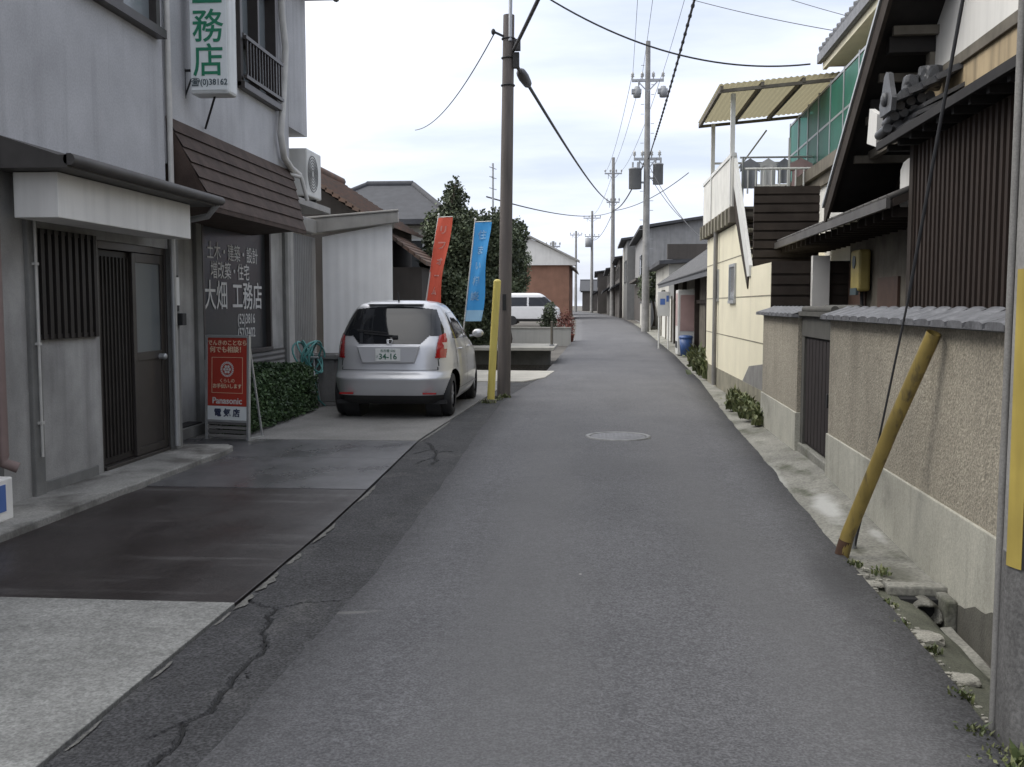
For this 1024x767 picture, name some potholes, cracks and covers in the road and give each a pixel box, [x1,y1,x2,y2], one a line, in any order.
crack [150,601,299,767]
manhole cover [585,432,651,441]
